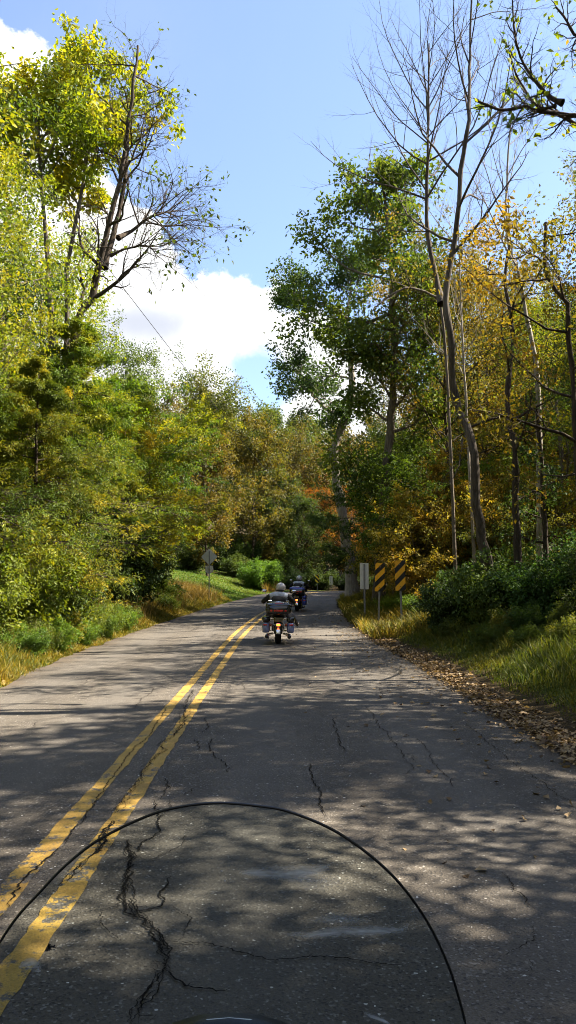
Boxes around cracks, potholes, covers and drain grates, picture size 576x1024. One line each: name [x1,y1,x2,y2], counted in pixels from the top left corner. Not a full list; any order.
crack [7,677,399,1023]
crack [367,688,453,786]
